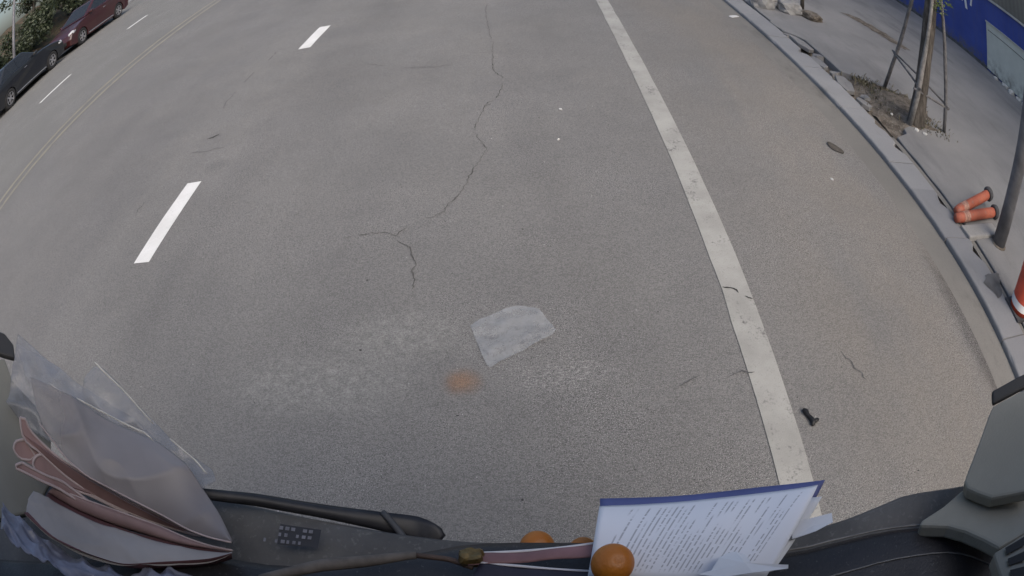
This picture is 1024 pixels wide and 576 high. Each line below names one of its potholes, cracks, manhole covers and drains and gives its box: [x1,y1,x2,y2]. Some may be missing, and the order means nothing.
crack [346,5,503,289]
